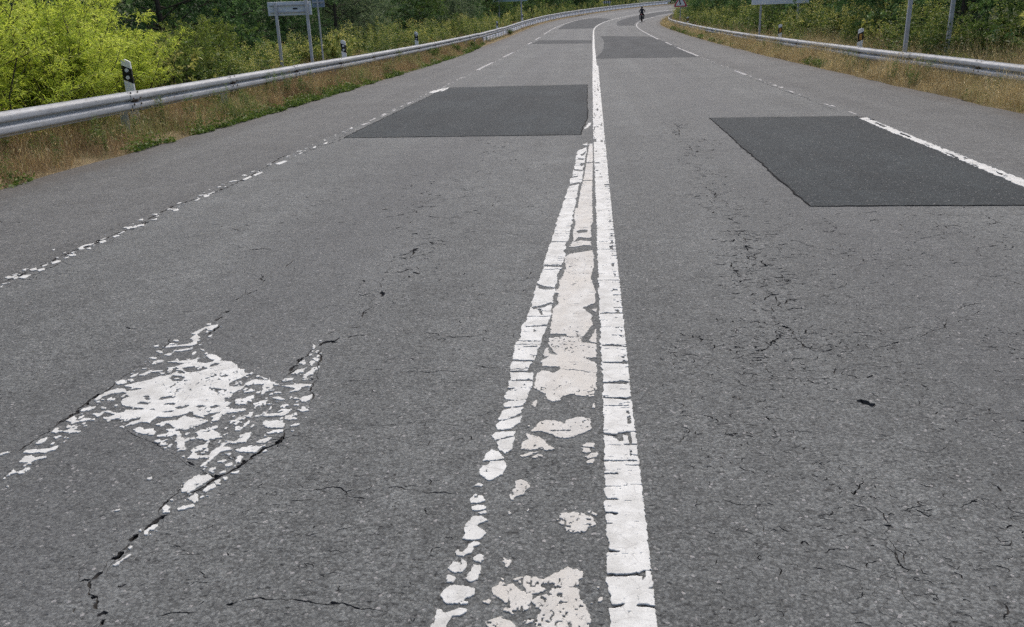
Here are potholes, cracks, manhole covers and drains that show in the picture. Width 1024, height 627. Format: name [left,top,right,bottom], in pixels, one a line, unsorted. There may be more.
crack [73,422,488,627]
crack [11,141,548,456]
crack [657,118,1024,627]
